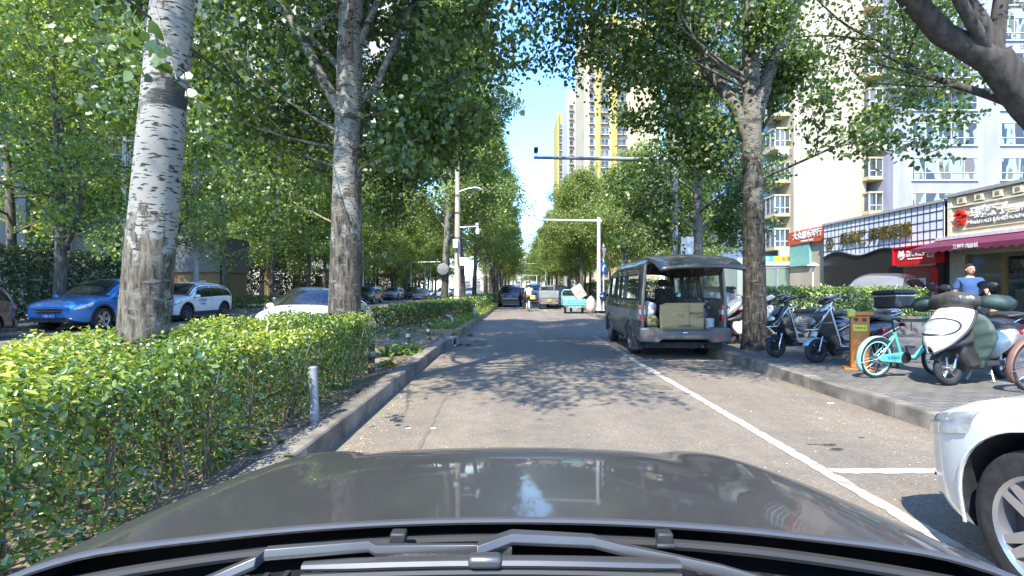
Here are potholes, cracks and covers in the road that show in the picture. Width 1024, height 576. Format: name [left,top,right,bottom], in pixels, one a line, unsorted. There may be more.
crack [417,393,448,450]
